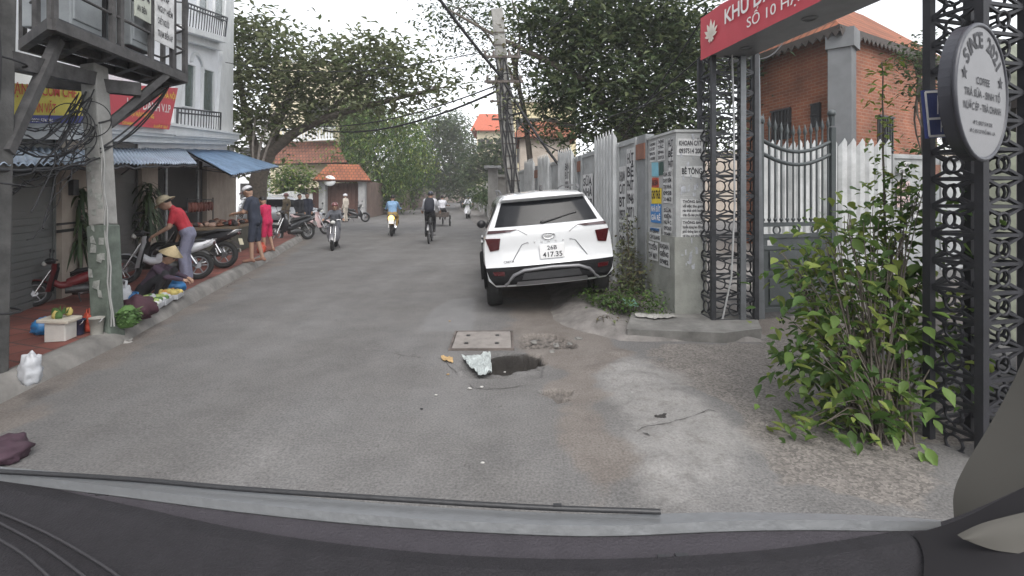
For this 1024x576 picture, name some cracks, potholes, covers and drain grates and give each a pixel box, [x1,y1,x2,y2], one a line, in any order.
pothole [517,331,597,349]
manhole cover [448,330,514,351]
pothole [454,351,563,379]
